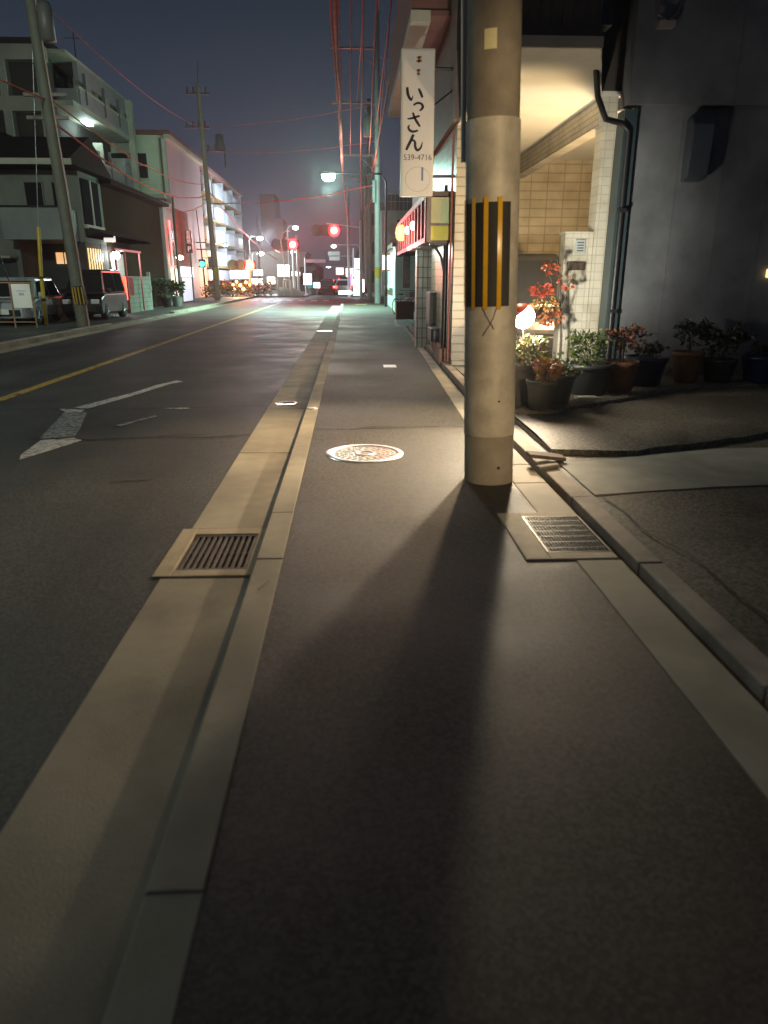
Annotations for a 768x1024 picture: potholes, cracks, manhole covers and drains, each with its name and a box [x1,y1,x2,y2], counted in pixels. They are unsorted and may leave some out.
drain grate [497,512,618,562]
drain grate [152,528,266,579]
manhole cover [326,444,403,463]
